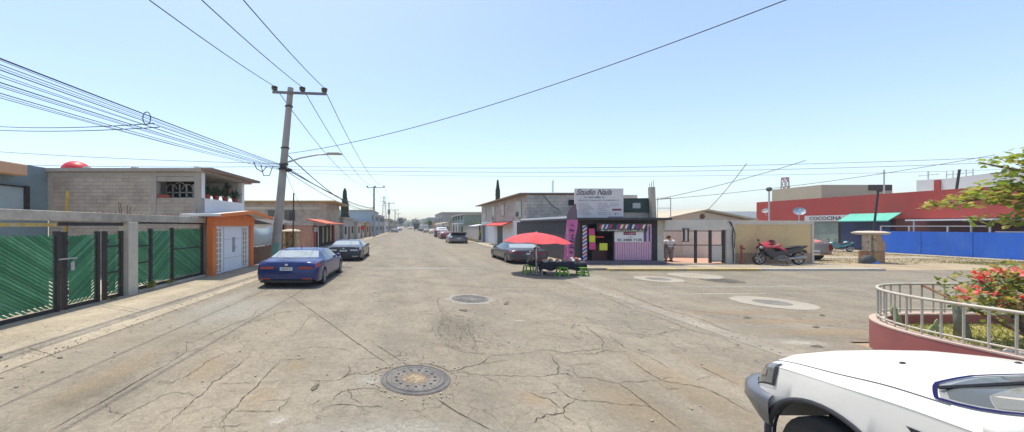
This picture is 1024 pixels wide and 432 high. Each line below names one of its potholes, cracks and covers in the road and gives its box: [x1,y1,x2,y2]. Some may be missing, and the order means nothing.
manhole cover [728,296,822,310]
manhole cover [444,294,495,304]
crack [109,355,303,431]
manhole cover [381,365,451,396]
crack [315,368,386,411]
crack [418,299,750,425]
